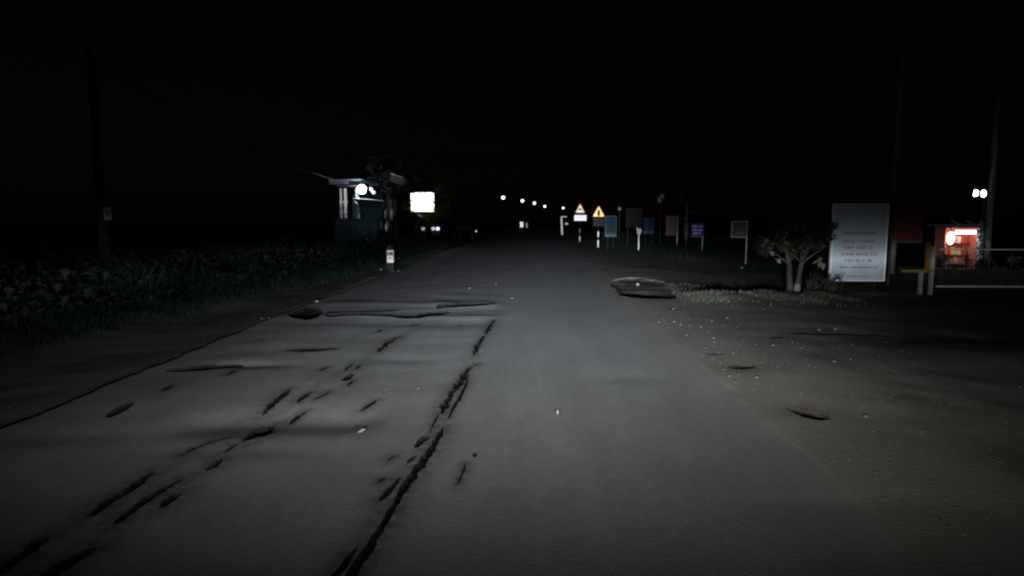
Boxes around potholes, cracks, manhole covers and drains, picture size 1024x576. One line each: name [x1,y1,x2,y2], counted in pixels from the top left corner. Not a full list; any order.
crack [87,471,183,525]
crack [332,320,495,576]
pothole [786,407,831,421]
pothole [287,306,324,320]
crack [180,389,330,471]
pothole [106,402,134,418]
crack [0,536,96,576]
